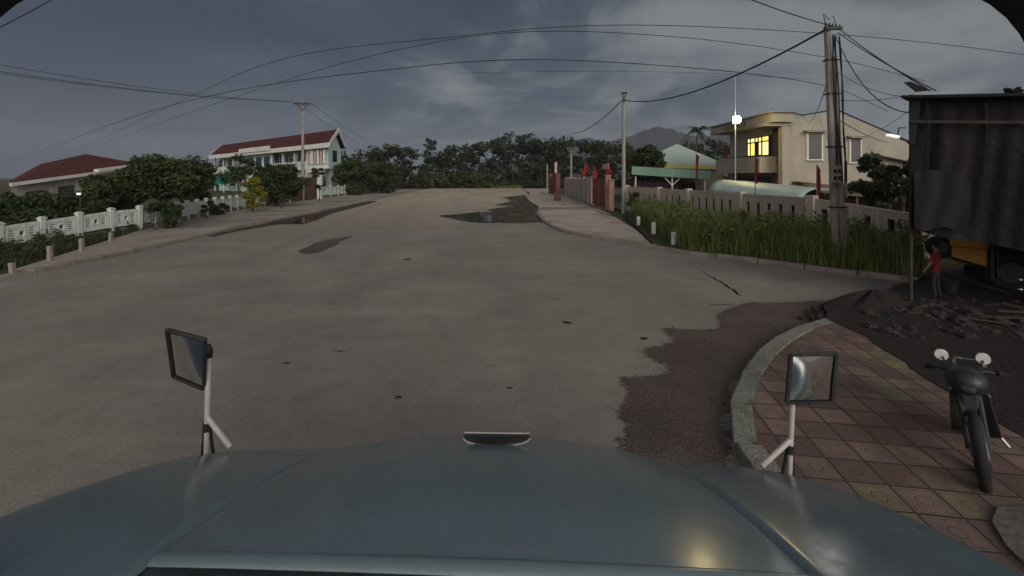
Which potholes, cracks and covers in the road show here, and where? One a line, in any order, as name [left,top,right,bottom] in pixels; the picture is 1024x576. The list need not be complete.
crack [699,270,741,305]
